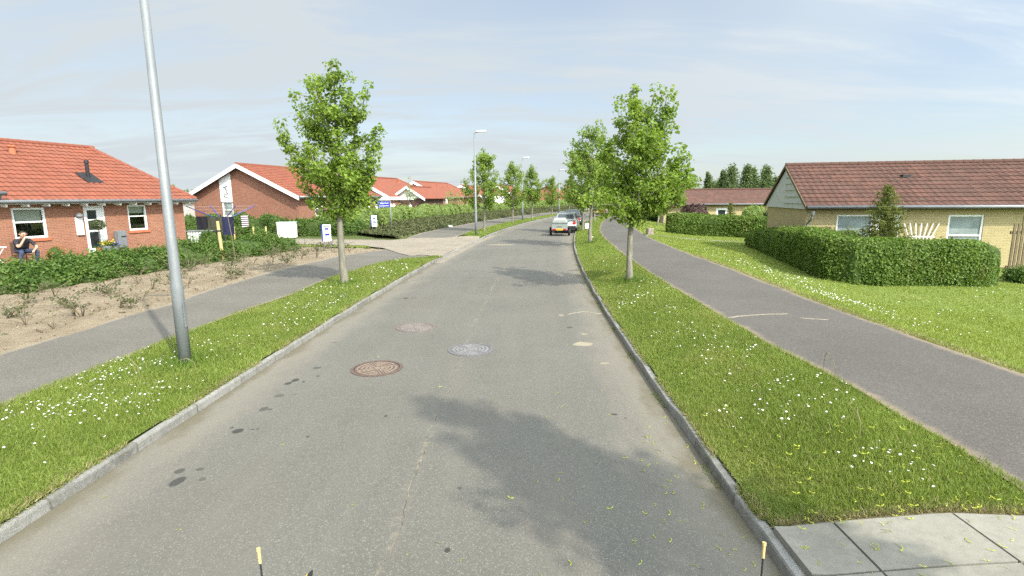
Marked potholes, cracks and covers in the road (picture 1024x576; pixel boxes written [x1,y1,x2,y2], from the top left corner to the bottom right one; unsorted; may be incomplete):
manhole cover [350,360,403,377]
manhole cover [448,343,493,356]
manhole cover [396,322,435,332]
